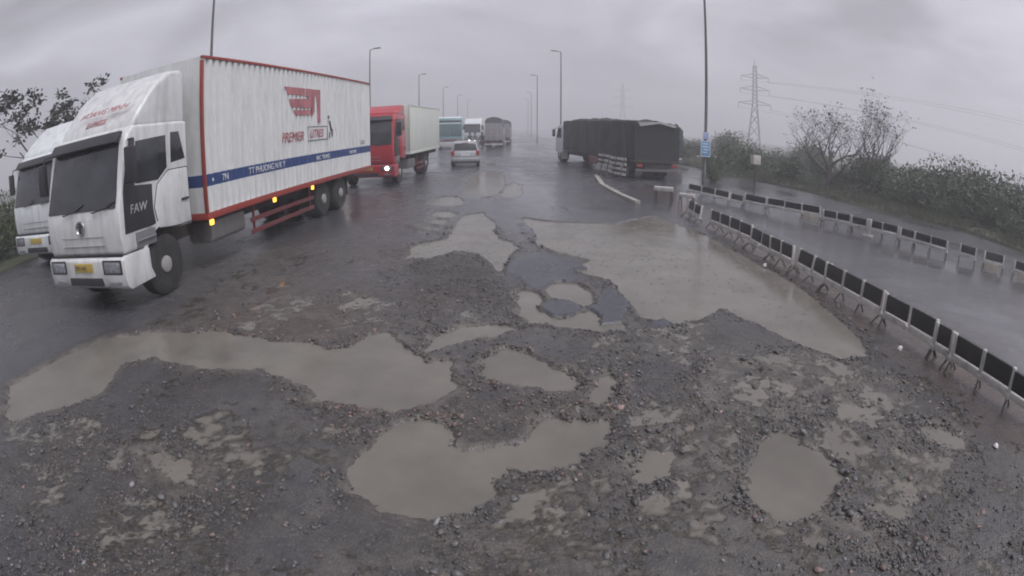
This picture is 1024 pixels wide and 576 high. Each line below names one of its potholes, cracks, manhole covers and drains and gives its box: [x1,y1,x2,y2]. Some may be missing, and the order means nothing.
pothole [514,288,629,332]
pothole [418,321,521,355]
pothole [544,279,597,306]
pothole [899,413,974,452]
pothole [266,330,461,412]
pothole [406,211,524,272]
pothole [745,425,849,525]
pothole [5,328,294,422]
pothole [344,414,616,520]
pothole [479,345,585,392]
